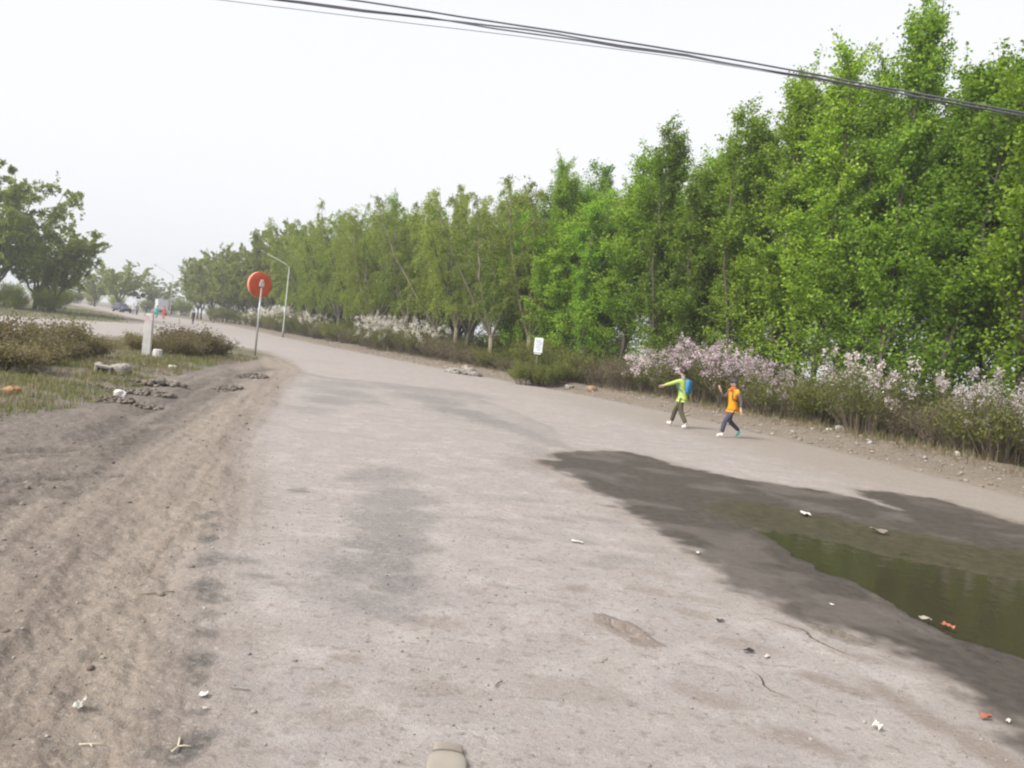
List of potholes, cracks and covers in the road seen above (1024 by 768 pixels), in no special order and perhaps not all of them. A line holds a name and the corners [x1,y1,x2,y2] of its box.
crack [722,610,881,714]
pothole [689,497,1024,671]
